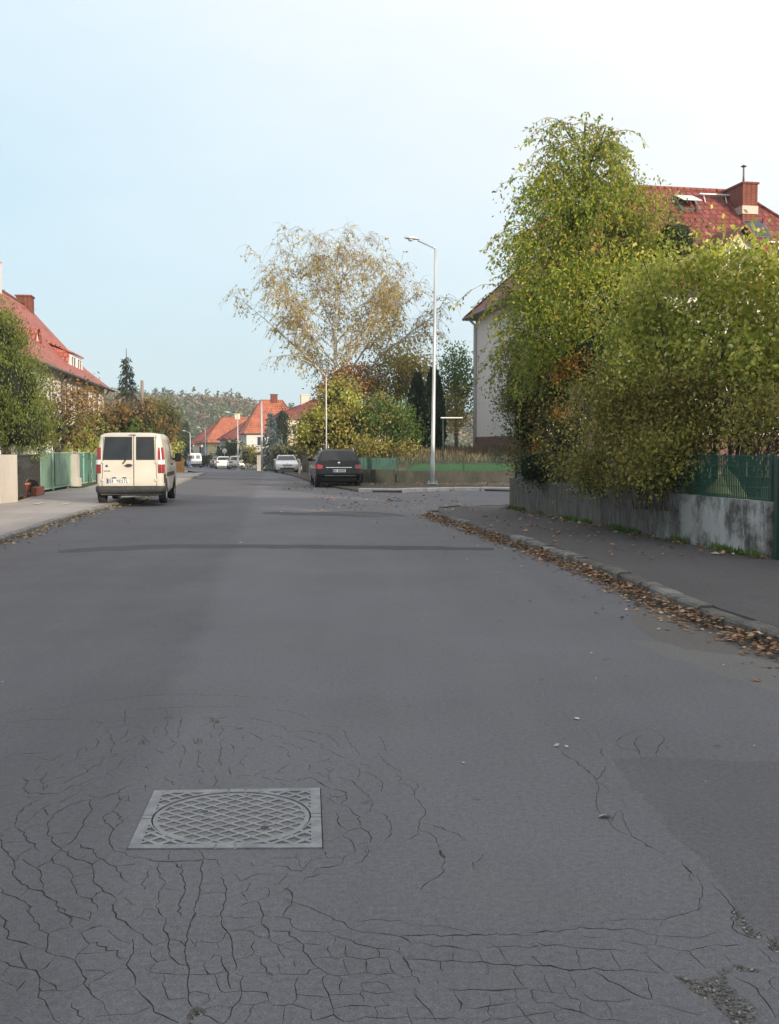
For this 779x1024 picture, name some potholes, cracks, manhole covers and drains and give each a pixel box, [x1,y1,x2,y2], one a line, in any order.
pothole [730,964,760,973]
crack [0,694,740,1024]
crack [712,884,779,1018]
pothole [673,967,760,1024]
manhole cover [127,788,322,850]
